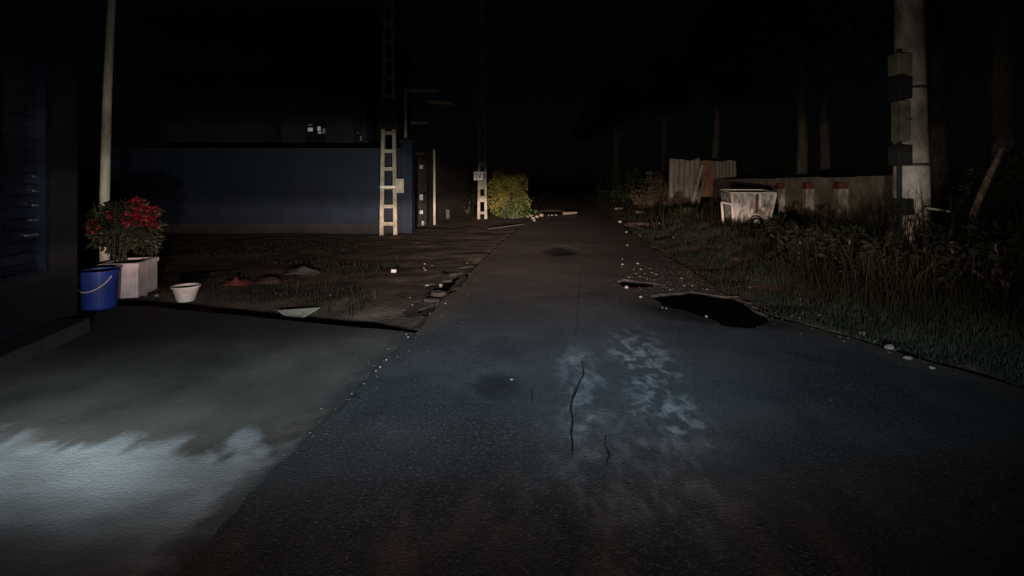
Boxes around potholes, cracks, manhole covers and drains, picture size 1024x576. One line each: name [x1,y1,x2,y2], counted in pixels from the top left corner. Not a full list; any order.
pothole [648,291,772,328]
pothole [443,265,478,273]
pothole [617,279,661,288]
pothole [428,270,467,296]
crack [569,361,644,455]
pothole [406,296,446,317]
